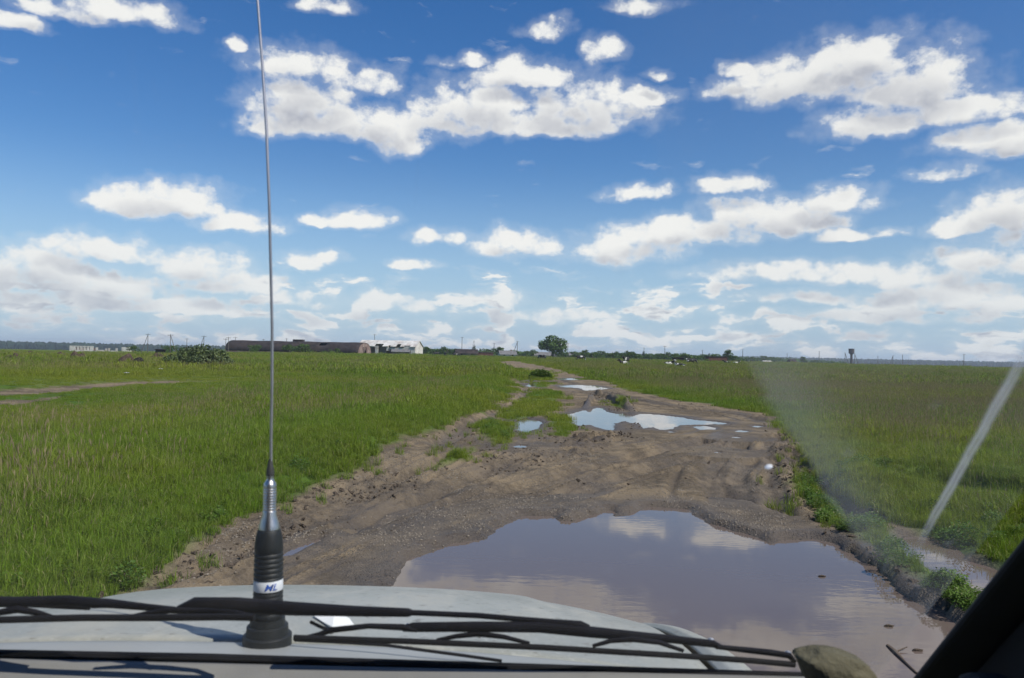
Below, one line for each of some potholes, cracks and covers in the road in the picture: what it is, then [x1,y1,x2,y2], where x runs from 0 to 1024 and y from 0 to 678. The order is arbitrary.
pothole [506,416,551,434]
pothole [349,499,970,678]
pothole [560,406,737,431]
